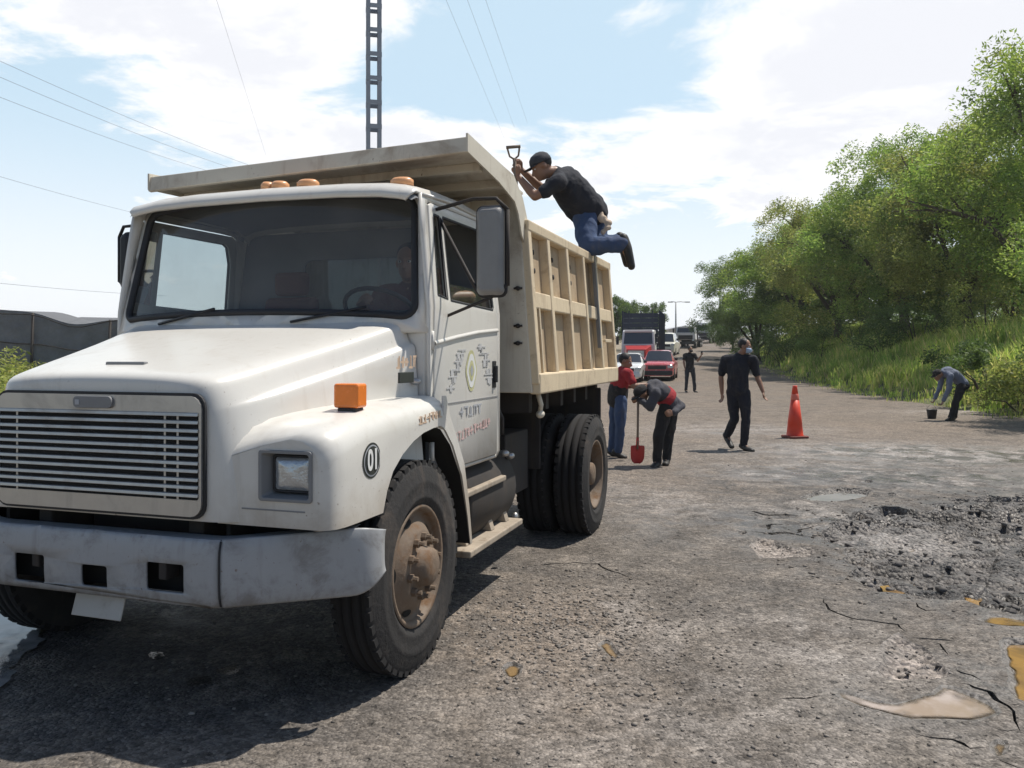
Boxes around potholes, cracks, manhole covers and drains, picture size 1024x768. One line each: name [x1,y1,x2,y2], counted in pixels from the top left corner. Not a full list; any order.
crack [823,599,1020,768]
pothole [821,494,1024,615]
pothole [876,632,954,681]
crack [525,562,627,577]
crack [753,511,814,536]
pothole [749,538,815,559]
